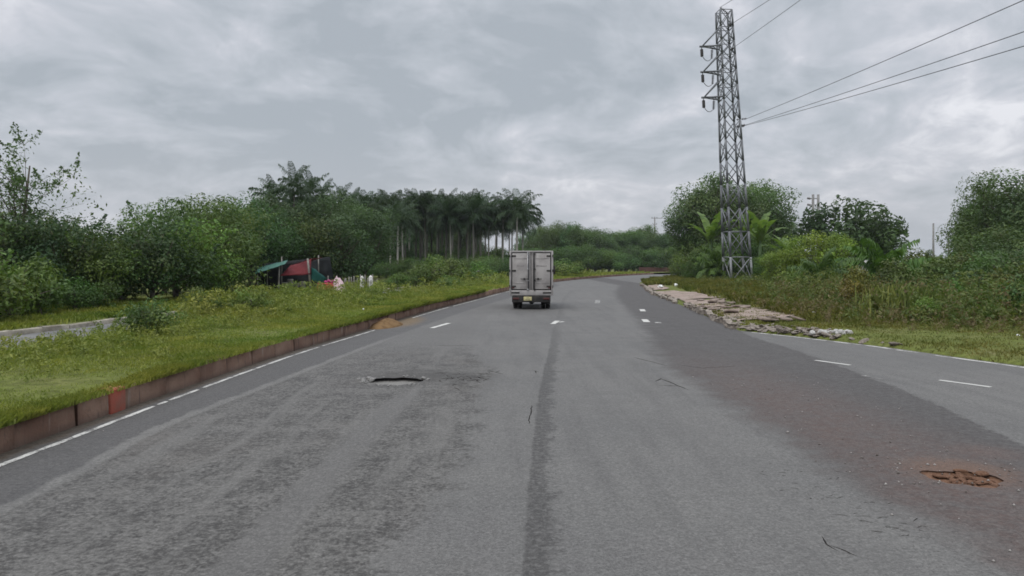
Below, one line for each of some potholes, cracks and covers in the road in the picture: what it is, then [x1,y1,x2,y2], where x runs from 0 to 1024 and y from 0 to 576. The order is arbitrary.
pothole [357,375,431,386]
crack [638,358,729,390]
pothole [920,469,1003,488]
